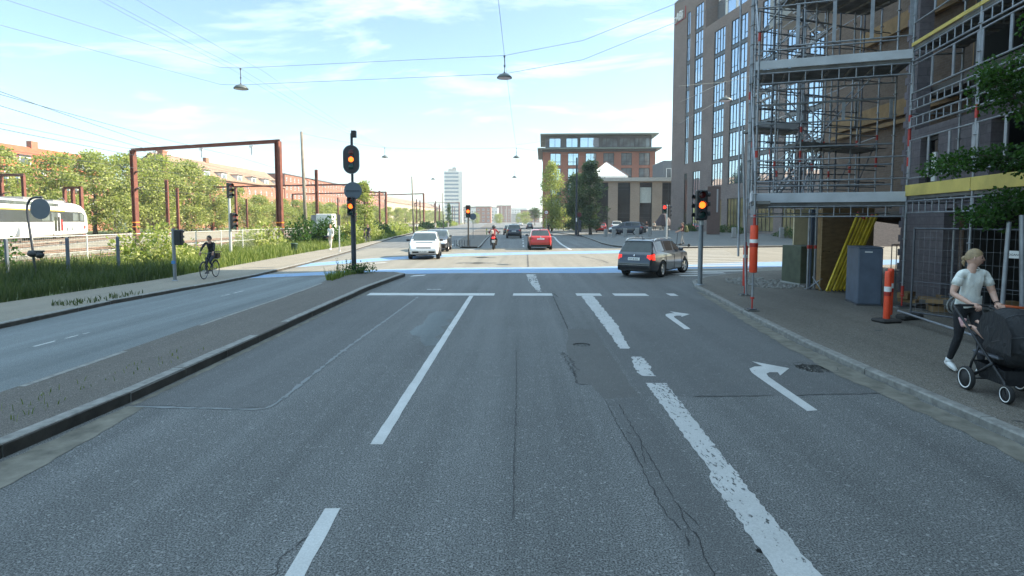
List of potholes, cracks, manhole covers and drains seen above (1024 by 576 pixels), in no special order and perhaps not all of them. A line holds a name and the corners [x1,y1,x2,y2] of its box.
pothole [795,364,830,373]
crack [267,536,308,576]
crack [605,400,715,576]
